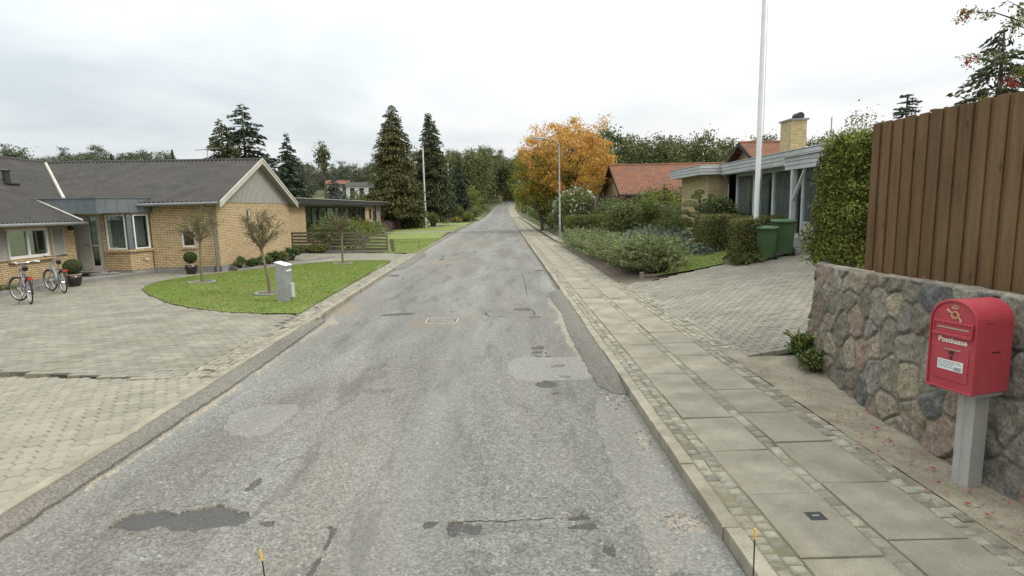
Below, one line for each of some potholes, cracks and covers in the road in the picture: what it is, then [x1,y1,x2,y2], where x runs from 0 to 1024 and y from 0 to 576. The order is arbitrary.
pothole [628,426,660,453]
utility cover [804,512,828,520]
pothole [243,477,262,492]
pothole [440,520,483,538]
pothole [567,513,592,523]
pothole [566,520,598,533]
pothole [654,507,718,541]
